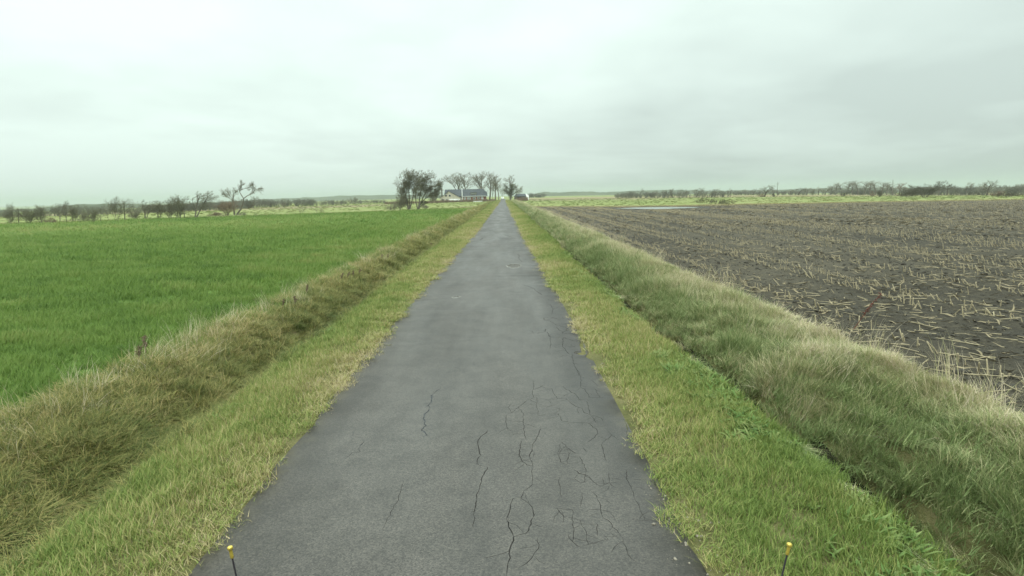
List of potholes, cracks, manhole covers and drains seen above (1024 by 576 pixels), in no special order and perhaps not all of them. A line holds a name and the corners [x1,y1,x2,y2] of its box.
crack [473,432,488,524]
crack [486,287,657,576]
